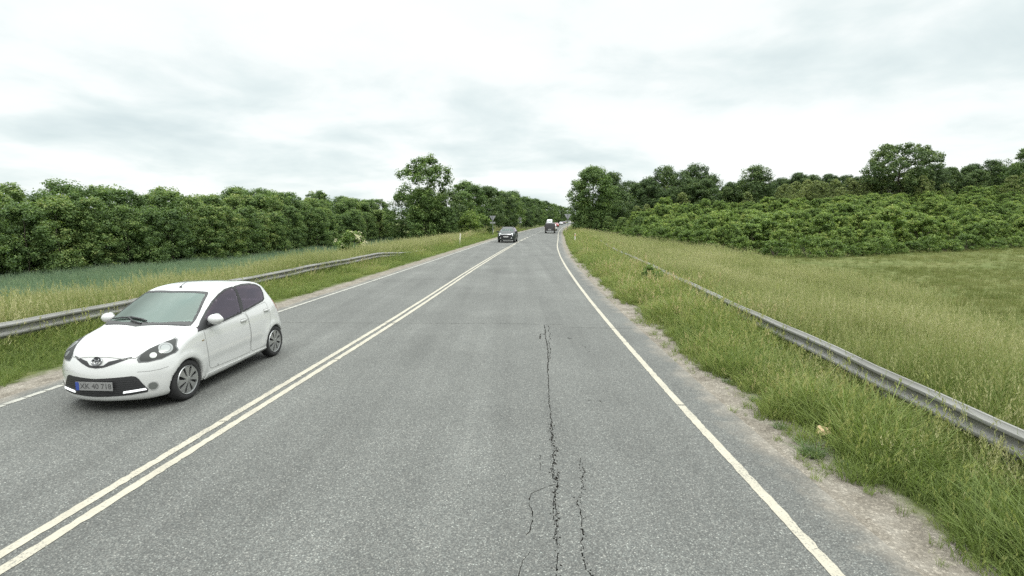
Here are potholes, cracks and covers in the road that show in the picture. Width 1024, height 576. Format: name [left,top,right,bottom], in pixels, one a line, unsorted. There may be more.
crack [526,325,594,576]
